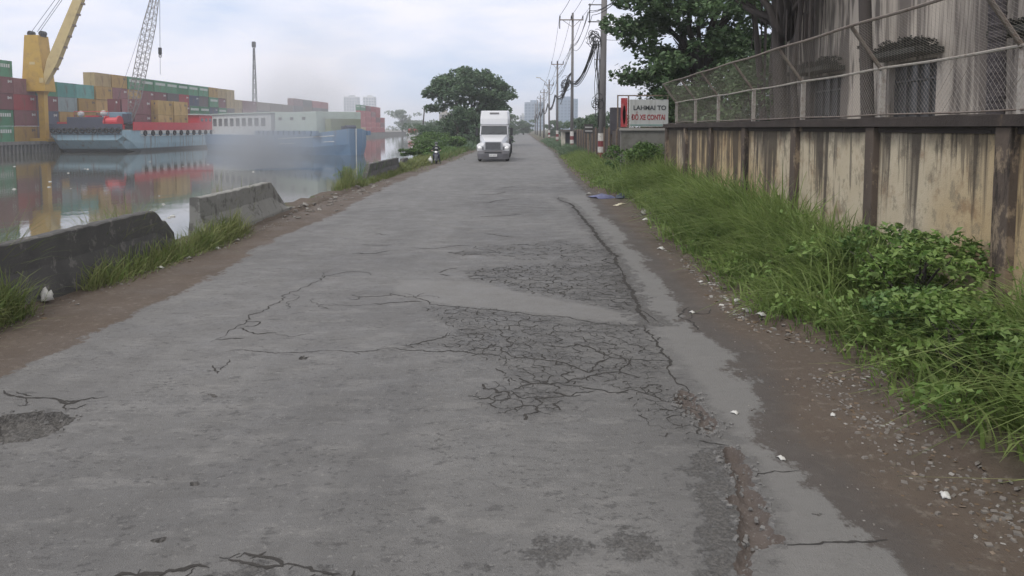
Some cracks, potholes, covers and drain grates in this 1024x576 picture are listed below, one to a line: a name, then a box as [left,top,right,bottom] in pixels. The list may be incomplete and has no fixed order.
crack [392,187,729,448]
crack [310,293,439,311]
crack [3,390,101,410]
pothole [0,409,83,445]
crack [114,551,355,576]
crack [208,271,394,374]
